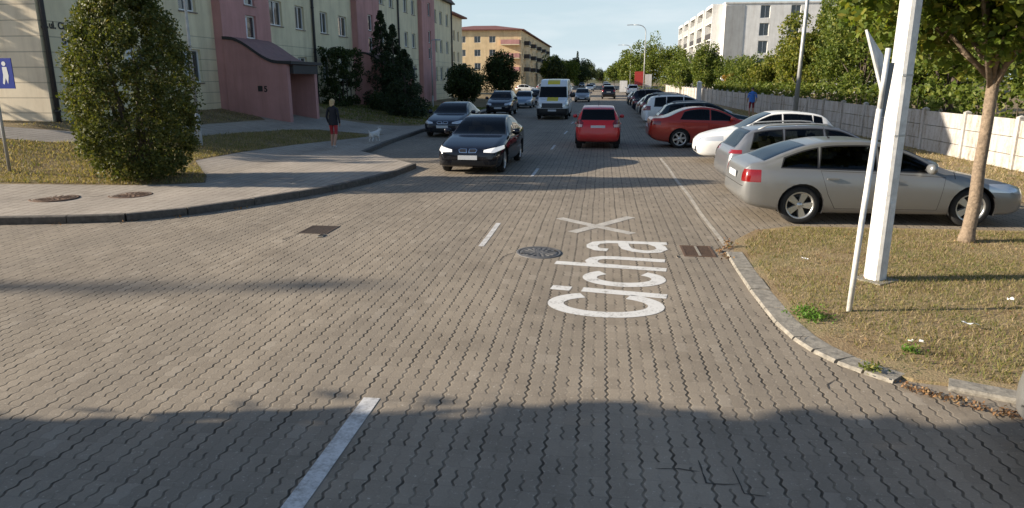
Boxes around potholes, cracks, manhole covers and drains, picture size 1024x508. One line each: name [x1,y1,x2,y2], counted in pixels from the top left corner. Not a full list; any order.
manhole cover [516,246,562,259]
drain grate [679,245,717,257]
crack [659,460,764,496]
